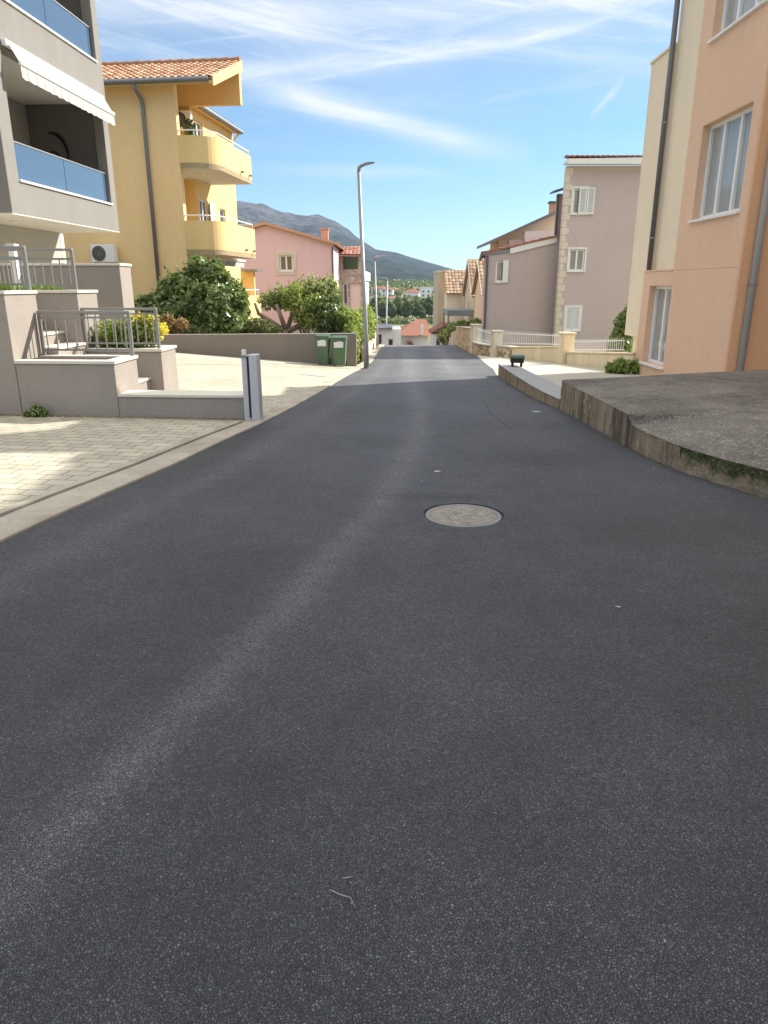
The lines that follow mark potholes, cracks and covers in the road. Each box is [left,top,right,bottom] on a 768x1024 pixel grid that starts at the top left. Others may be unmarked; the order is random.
manhole cover [424,504,504,527]
